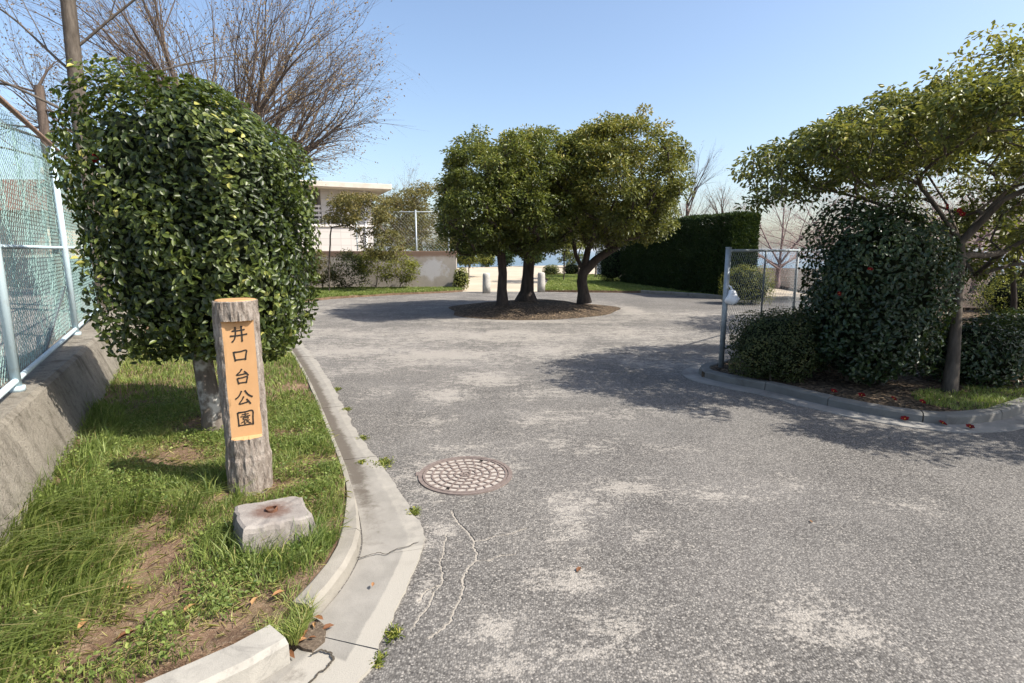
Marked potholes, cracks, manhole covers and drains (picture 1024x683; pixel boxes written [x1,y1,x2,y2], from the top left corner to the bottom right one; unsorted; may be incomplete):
crack [308,649,335,683]
manhole cover [415,456,512,496]
crack [357,511,527,639]
